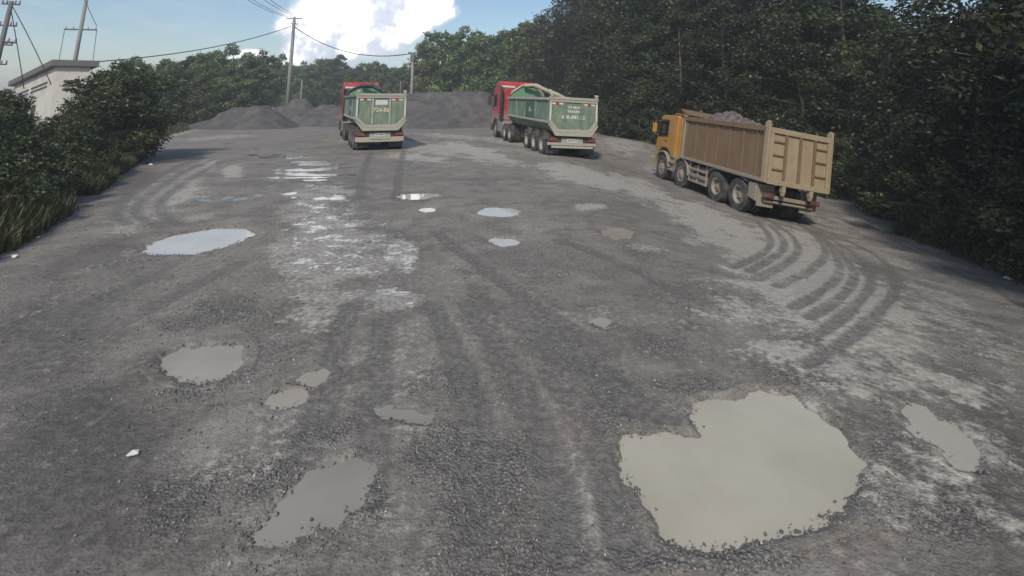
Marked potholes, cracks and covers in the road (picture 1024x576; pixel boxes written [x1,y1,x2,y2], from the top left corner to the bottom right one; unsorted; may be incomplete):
pothole [139,336,261,391]
pothole [406,205,447,215]
pothole [248,383,322,417]
pothole [386,191,452,202]
pothole [587,225,644,242]
pothole [466,205,531,220]
pothole [121,224,271,260]
pothole [226,447,396,564]
pothole [357,396,449,433]
pothole [880,397,1004,483]
pothole [600,380,888,567]
pothole [476,235,532,250]
